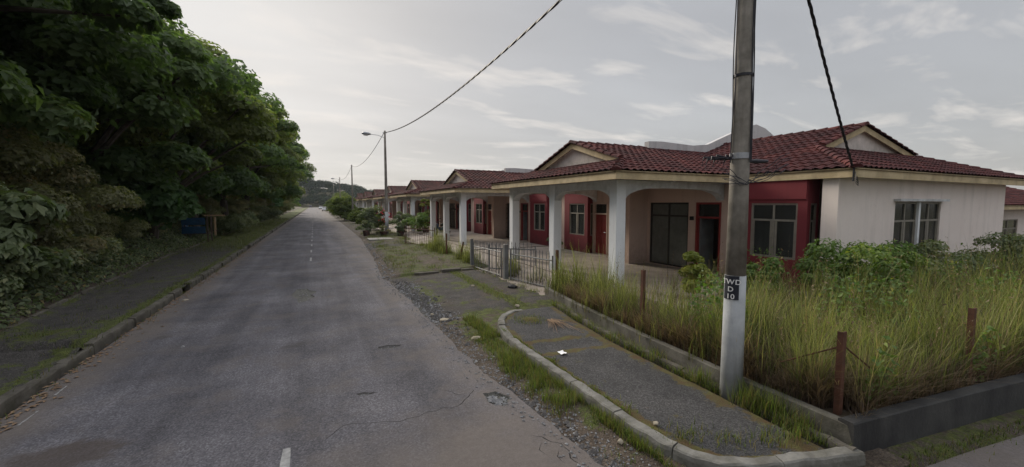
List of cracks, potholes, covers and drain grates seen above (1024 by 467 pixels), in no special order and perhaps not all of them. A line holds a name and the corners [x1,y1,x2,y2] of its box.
crack [532,435,579,464]
crack [322,390,474,440]
pothole [483,391,510,406]
